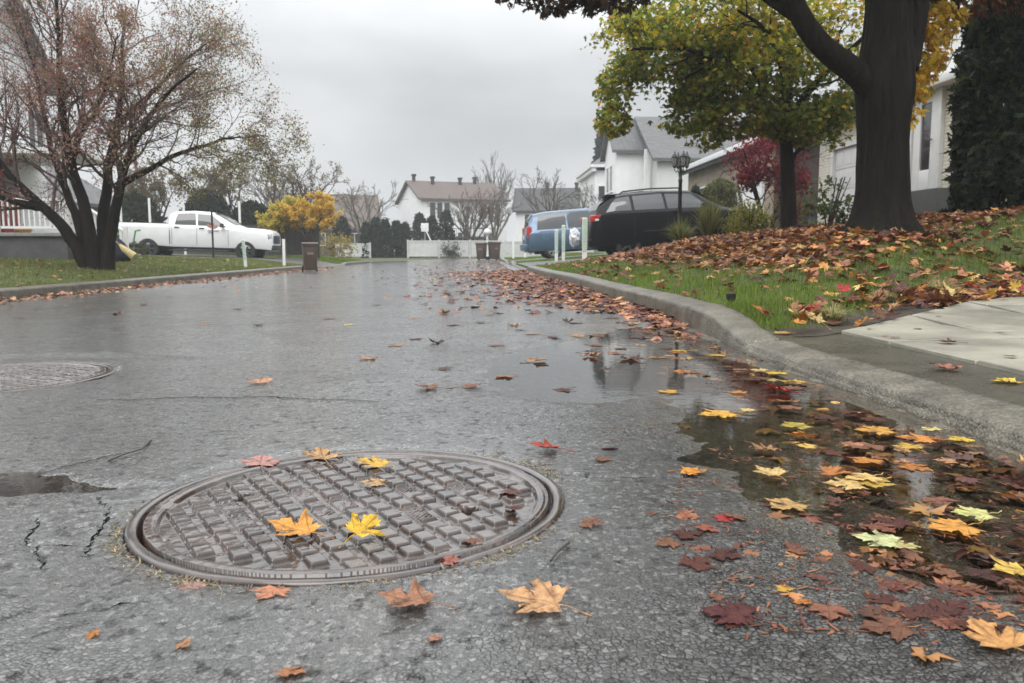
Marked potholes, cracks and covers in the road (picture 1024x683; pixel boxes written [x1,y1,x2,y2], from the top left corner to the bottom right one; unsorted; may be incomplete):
manhole cover [0,362,116,393]
manhole cover [124,449,564,587]
crack [25,500,111,569]
